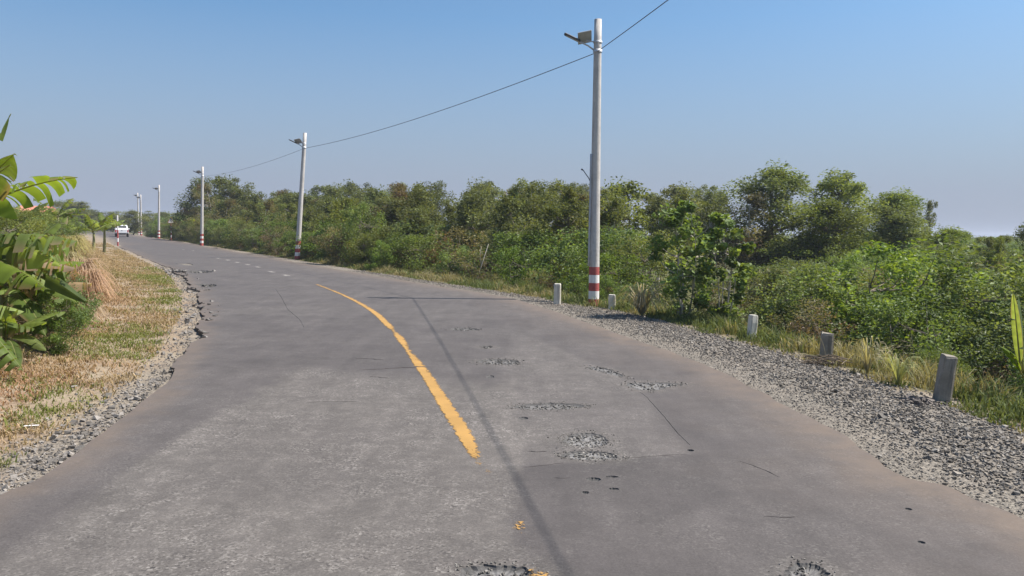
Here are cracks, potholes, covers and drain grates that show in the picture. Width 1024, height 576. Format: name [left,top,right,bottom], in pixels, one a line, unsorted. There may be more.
pothole [547,429,615,452]
pothole [584,365,634,379]
pothole [506,401,596,411]
pothole [467,358,525,366]
pothole [768,556,836,576]
pothole [554,449,630,462]
pothole [444,559,550,576]
pothole [618,380,688,392]
